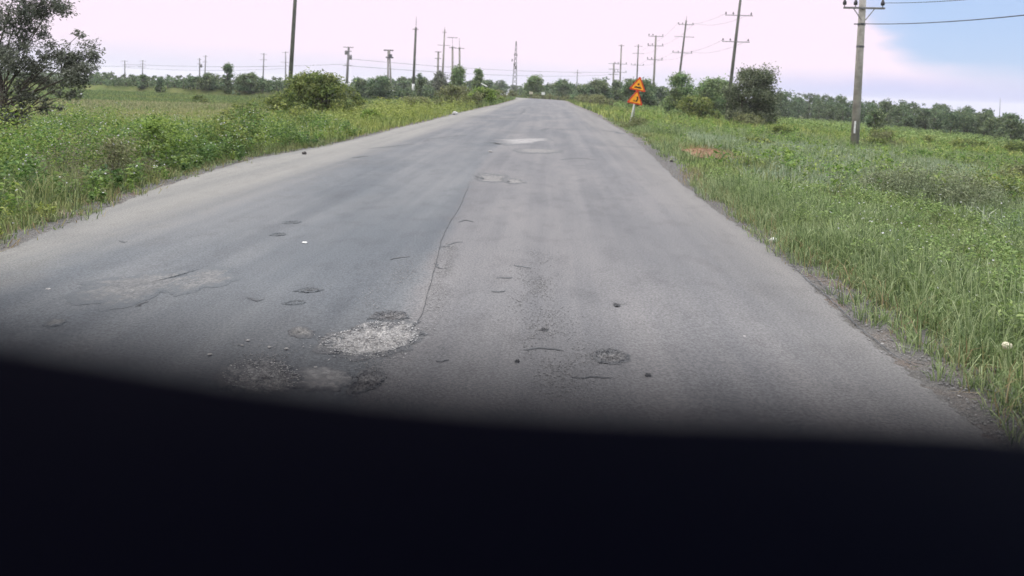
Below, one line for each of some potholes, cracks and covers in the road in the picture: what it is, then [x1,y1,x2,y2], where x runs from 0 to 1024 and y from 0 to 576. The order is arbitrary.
pothole [313,320,430,356]
pothole [589,348,631,365]
pothole [369,310,410,322]
pothole [473,173,510,183]
